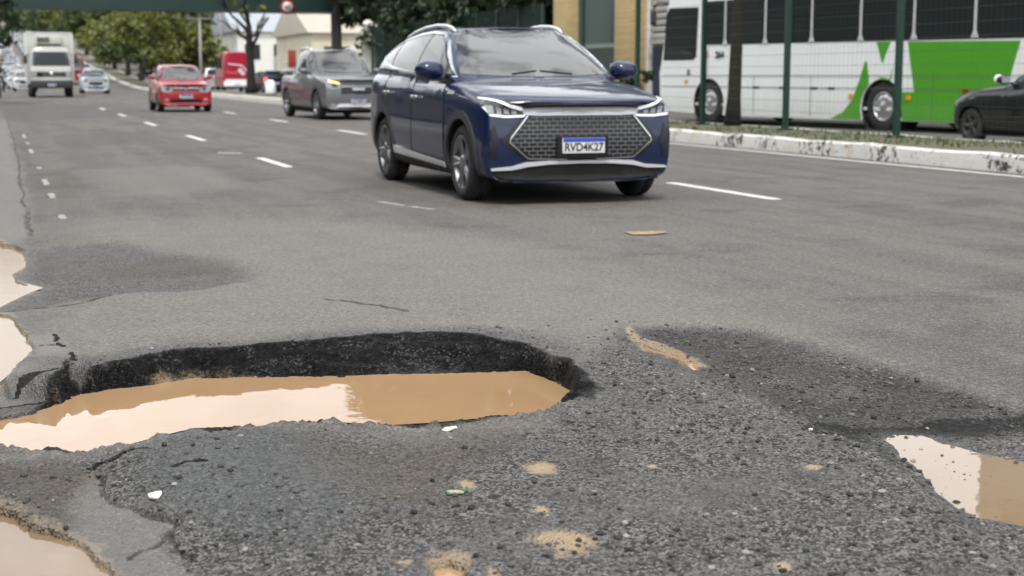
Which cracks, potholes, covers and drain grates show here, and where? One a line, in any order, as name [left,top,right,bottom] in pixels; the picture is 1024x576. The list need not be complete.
crack [86,447,208,564]
pothole [0,314,38,407]
crack [3,110,34,236]
pothole [0,241,44,313]
pothole [796,407,1024,546]
crack [325,299,409,312]
pothole [0,331,601,462]
pothole [0,508,120,576]
